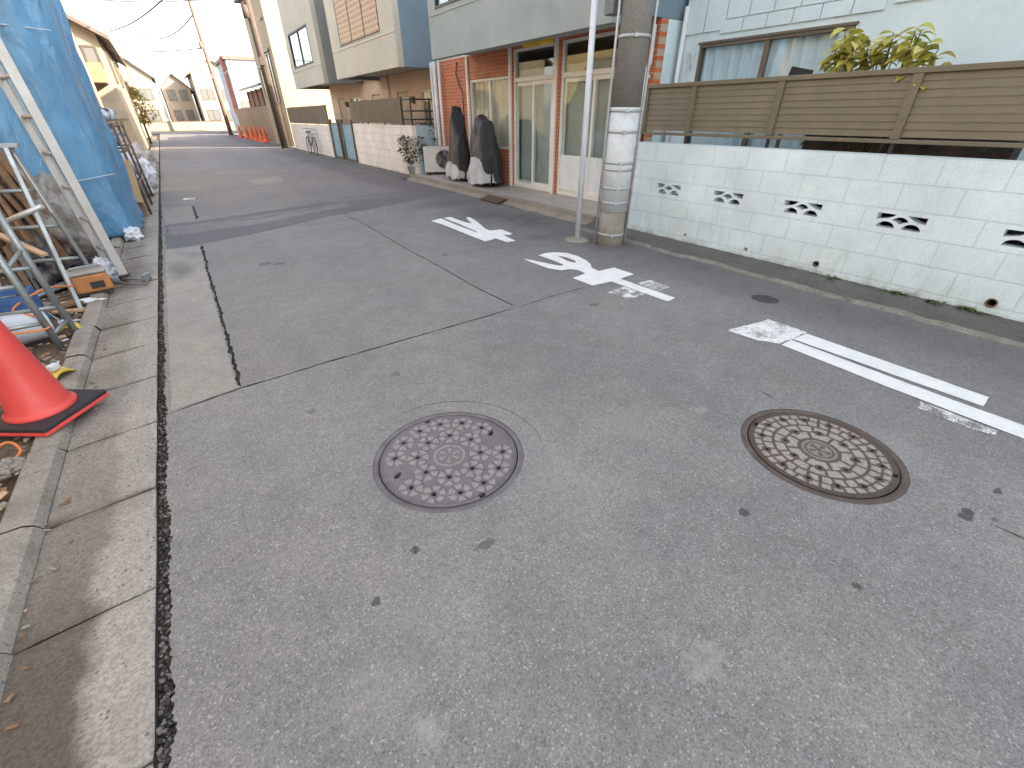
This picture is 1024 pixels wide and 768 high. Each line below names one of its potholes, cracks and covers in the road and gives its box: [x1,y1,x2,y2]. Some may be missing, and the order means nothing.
crack [200,245,241,386]
manhole cover [373,412,524,513]
manhole cover [741,409,910,505]
crack [155,134,198,768]
